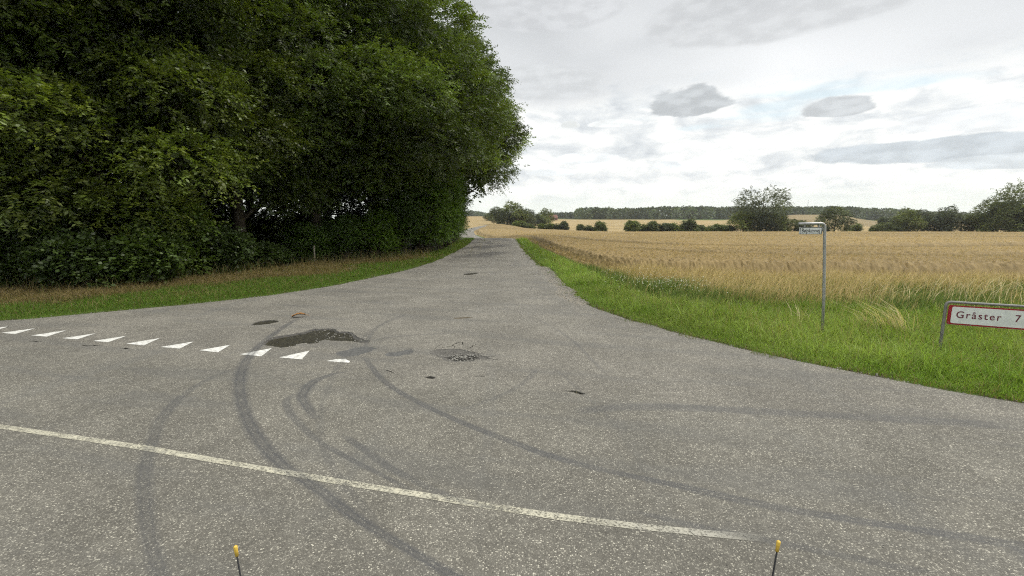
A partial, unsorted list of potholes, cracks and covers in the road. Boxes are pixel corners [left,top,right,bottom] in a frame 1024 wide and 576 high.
pothole [262,328,370,348]
pothole [429,349,491,362]
